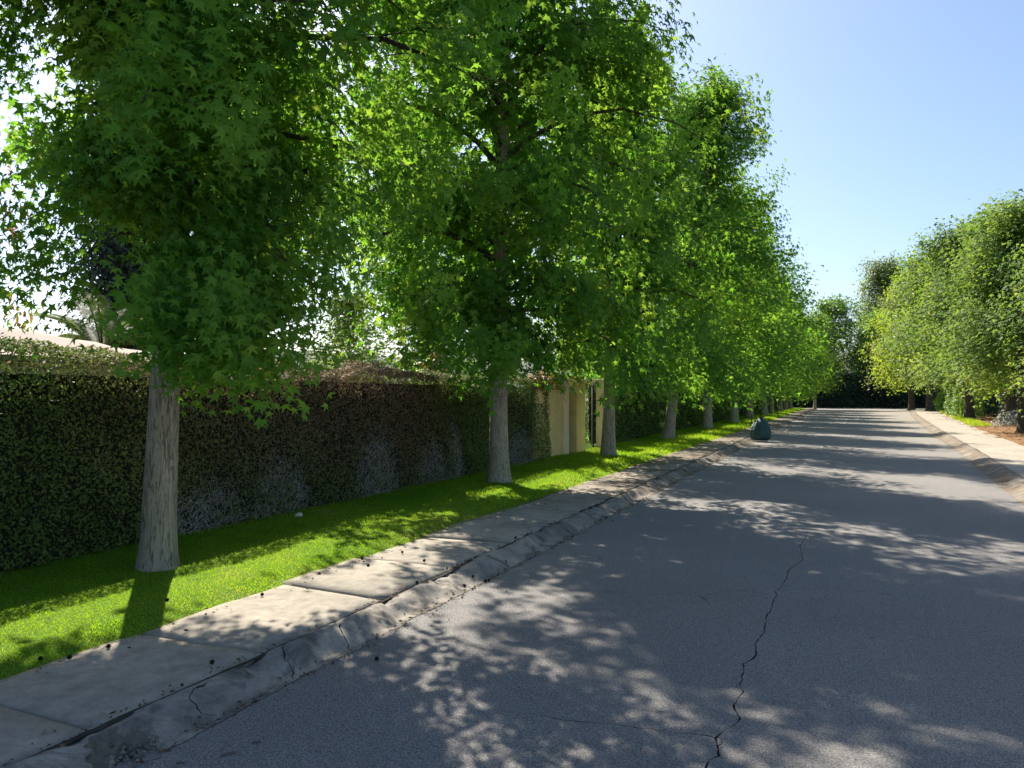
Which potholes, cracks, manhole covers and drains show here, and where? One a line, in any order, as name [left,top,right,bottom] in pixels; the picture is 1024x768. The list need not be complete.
crack [546,539,894,768]
